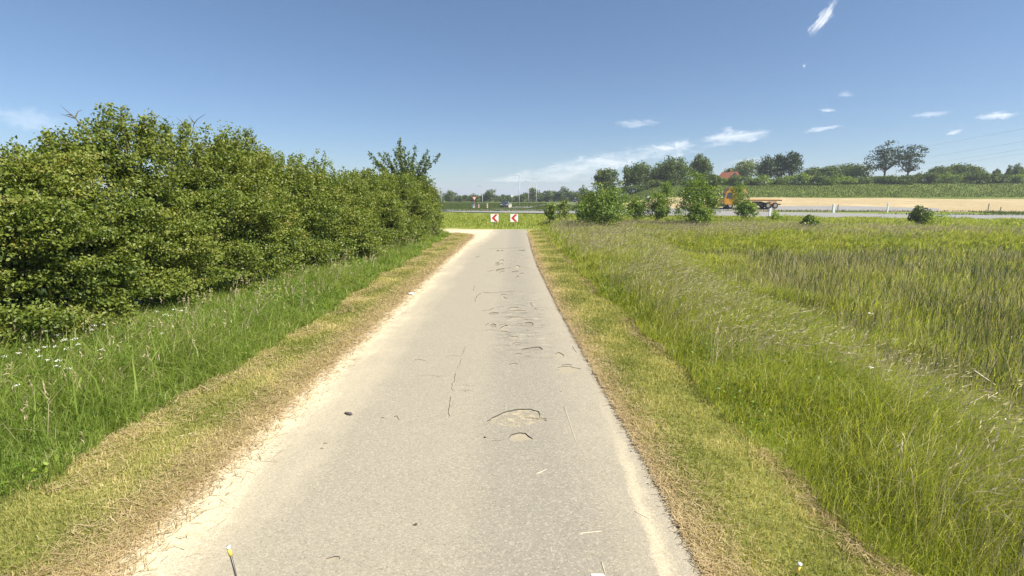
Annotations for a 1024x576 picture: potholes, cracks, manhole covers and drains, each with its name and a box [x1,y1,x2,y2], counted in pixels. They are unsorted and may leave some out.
pothole [487,409,547,427]
pothole [509,432,533,442]
